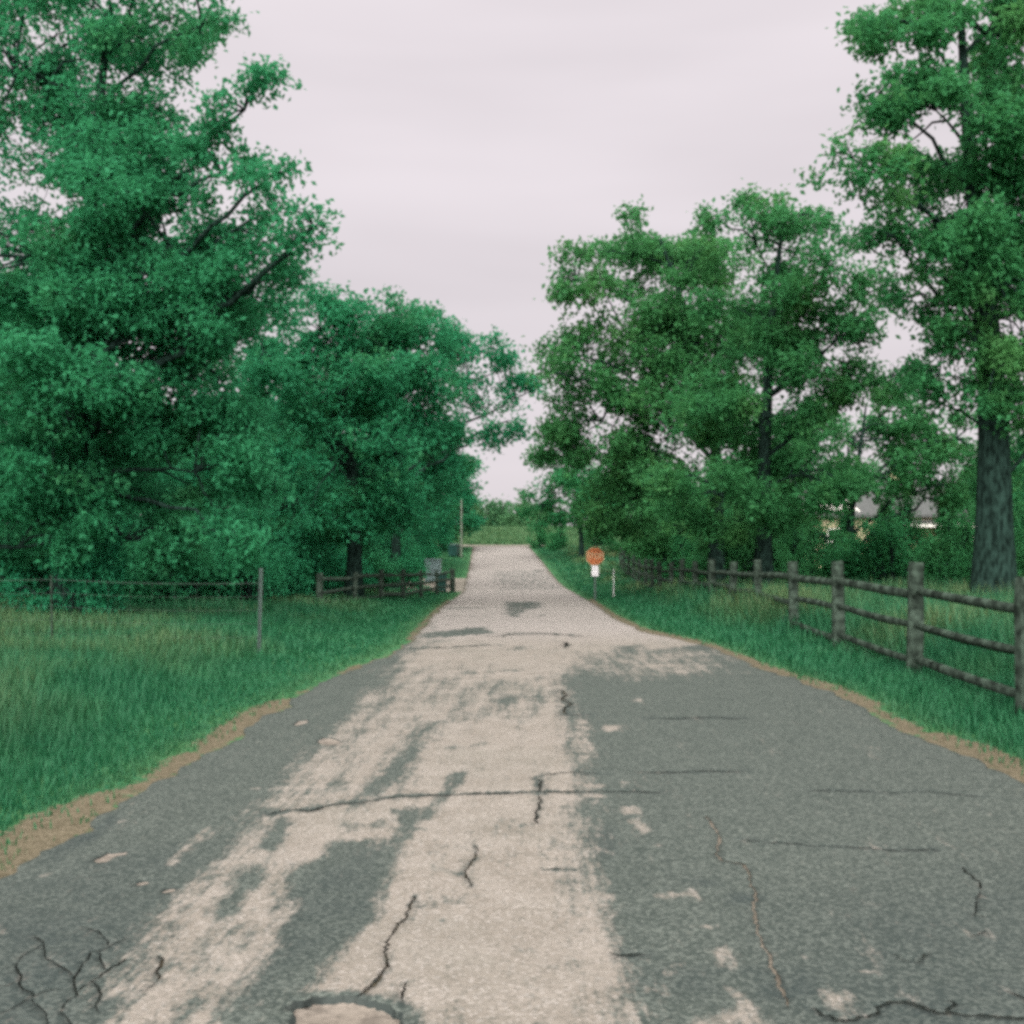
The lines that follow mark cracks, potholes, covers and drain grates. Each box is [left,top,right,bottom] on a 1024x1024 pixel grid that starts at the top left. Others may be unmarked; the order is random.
crack [145,955,165,991]
crack [706,815,789,1006]
crack [464,847,478,886]
crack [748,839,932,850]
crack [813,991,1024,1022]
crack [270,772,649,823]
crack [358,897,415,1002]
crack [6,926,126,1024]
pothole [284,995,405,1024]
crack [963,869,985,936]
